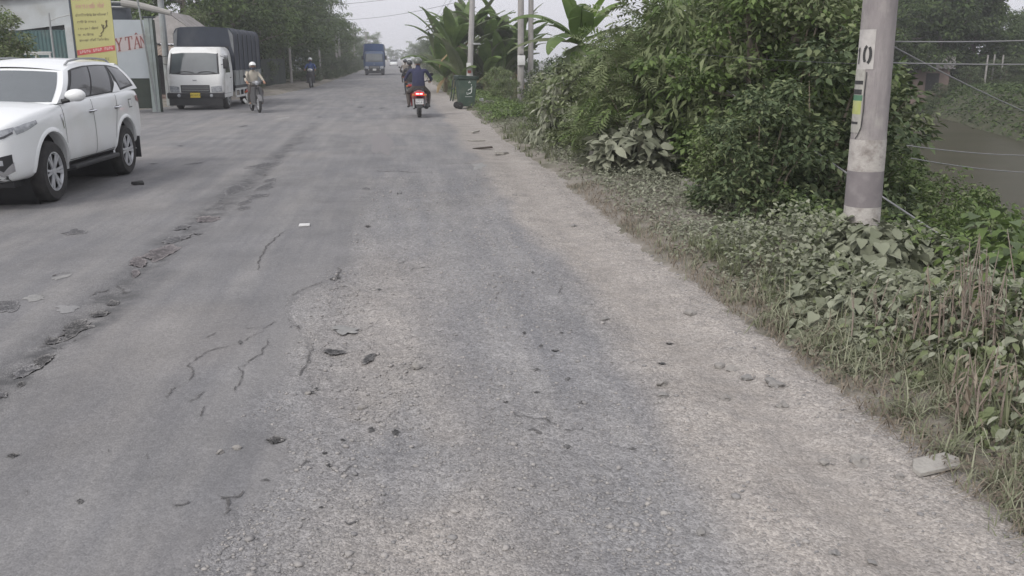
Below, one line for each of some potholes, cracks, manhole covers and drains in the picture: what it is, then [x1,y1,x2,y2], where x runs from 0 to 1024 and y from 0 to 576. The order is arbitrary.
pothole [140,244,182,262]
pothole [33,353,56,367]
pothole [58,318,95,341]
crack [165,321,323,416]
pothole [0,299,19,312]
pothole [129,256,147,268]
pothole [224,184,251,196]
pothole [162,234,192,244]
pothole [13,363,41,379]
